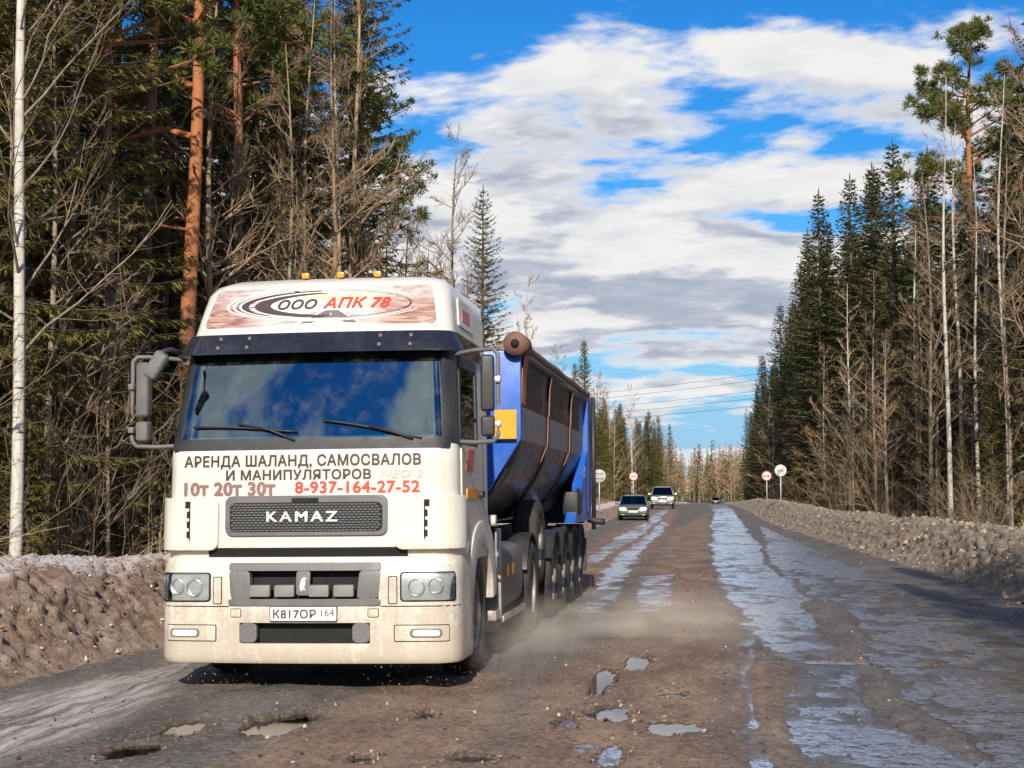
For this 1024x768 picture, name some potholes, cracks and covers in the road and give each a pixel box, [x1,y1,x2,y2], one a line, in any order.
pothole [136,719,219,738]
pothole [230,707,330,740]
pothole [593,745,626,767]
pothole [620,656,655,671]
pothole [577,704,633,723]
pothole [91,740,170,762]
pothole [586,667,619,698]
pothole [639,720,707,737]
pothole [661,691,693,699]
pothole [552,713,580,730]
